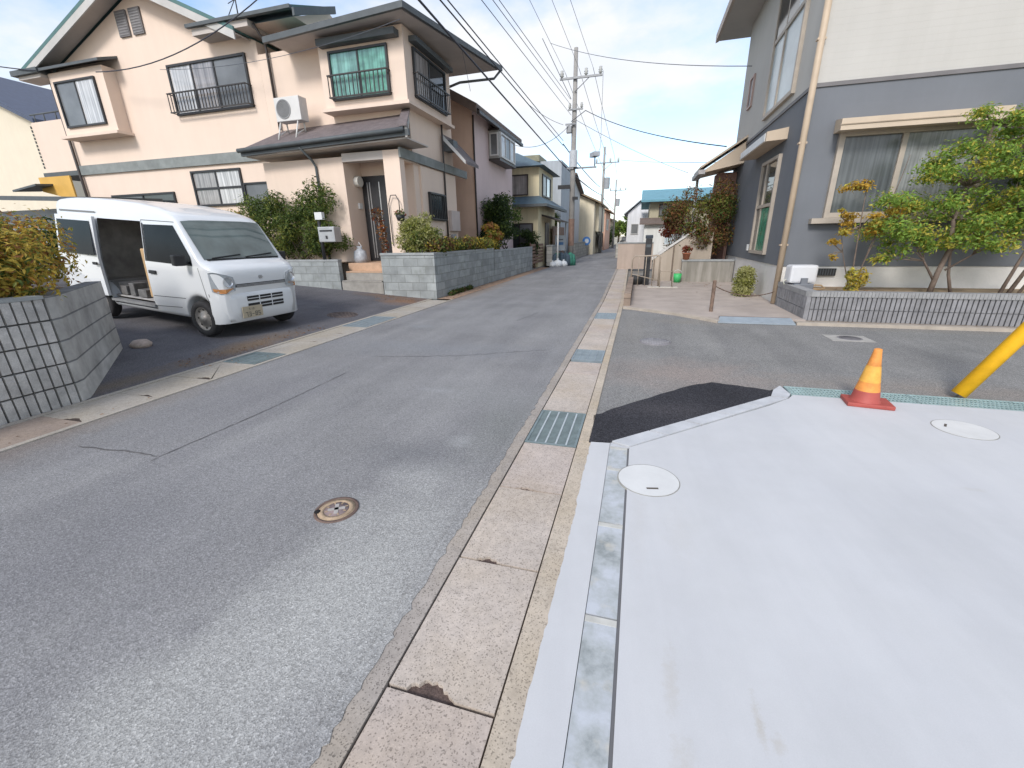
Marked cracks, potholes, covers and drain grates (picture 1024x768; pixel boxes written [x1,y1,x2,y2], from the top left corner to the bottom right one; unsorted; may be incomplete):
drain grate [525,410,586,448]
manhole cover [639,338,671,346]
drain grate [223,352,285,365]
manhole cover [822,334,877,343]
drain grate [571,349,606,363]
utility cover [930,419,1000,441]
drain grate [343,316,396,327]
utility cover [617,464,680,497]
manhole cover [314,497,359,523]
